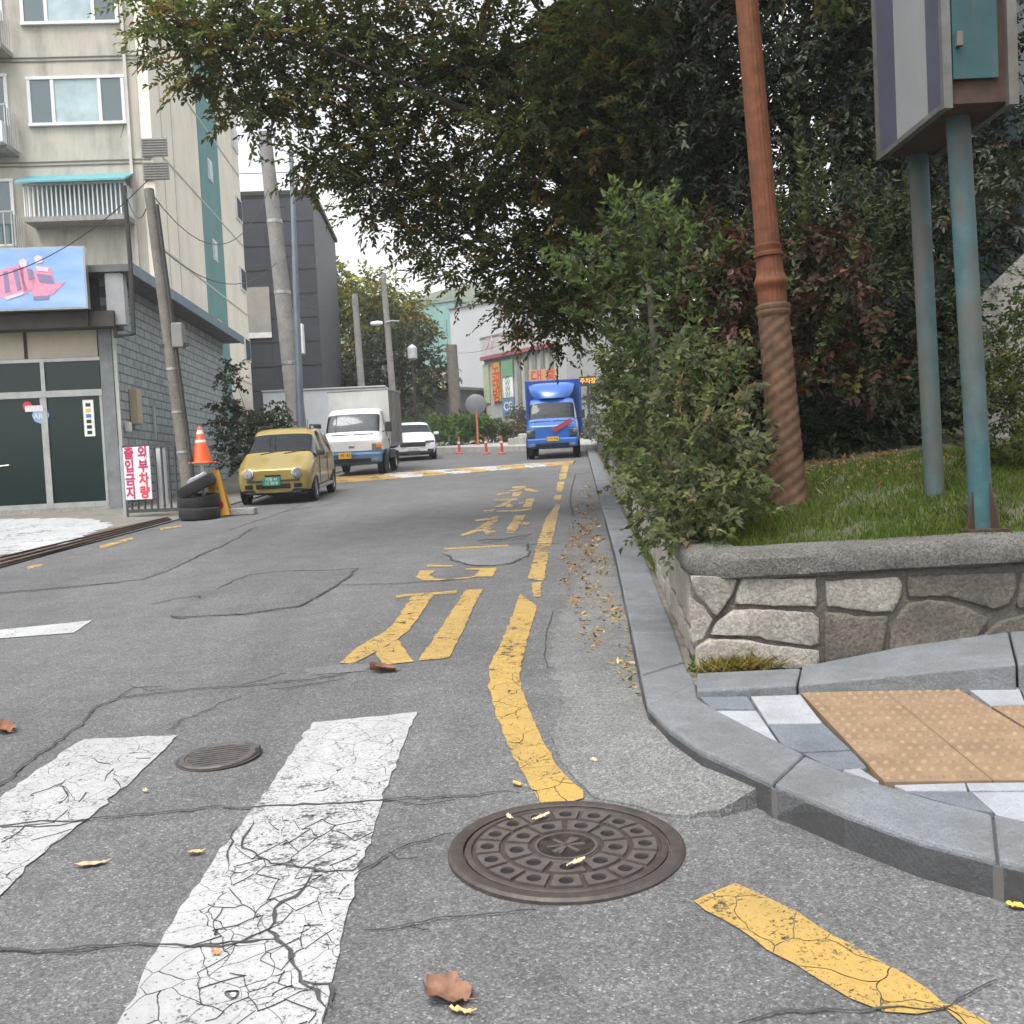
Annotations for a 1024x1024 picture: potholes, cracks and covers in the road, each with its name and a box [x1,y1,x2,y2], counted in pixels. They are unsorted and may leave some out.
manhole cover [175,742,262,772]
manhole cover [448,801,686,906]
crack [0,500,333,593]
